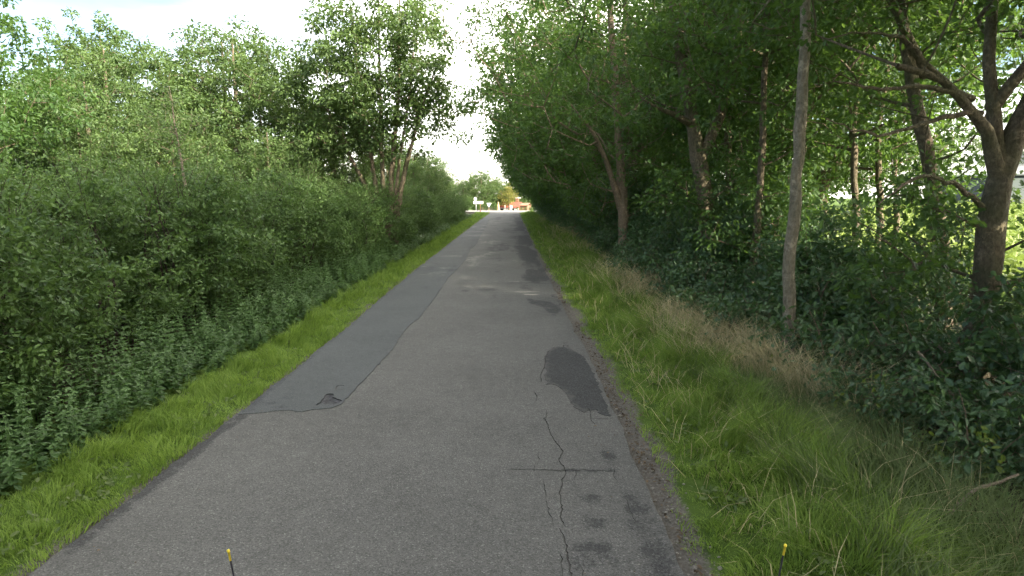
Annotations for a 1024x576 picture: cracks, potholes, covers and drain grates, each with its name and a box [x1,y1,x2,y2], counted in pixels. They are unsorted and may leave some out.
crack [520,342,636,576]
pothole [319,394,341,405]
